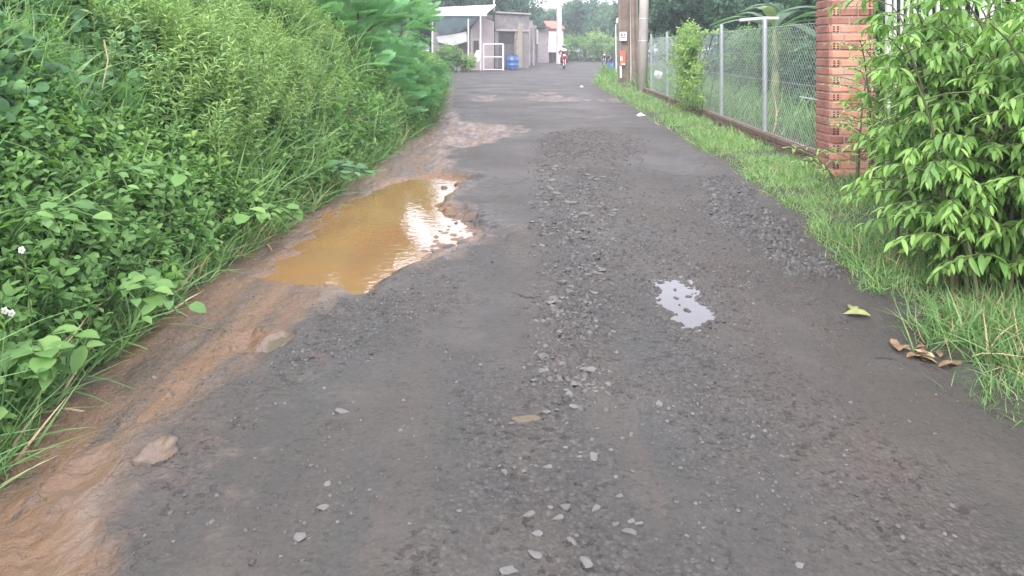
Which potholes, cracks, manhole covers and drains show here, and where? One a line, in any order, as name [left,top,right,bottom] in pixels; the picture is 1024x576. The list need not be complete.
pothole [251,171,506,300]
pothole [648,274,724,334]
pothole [253,330,296,354]
